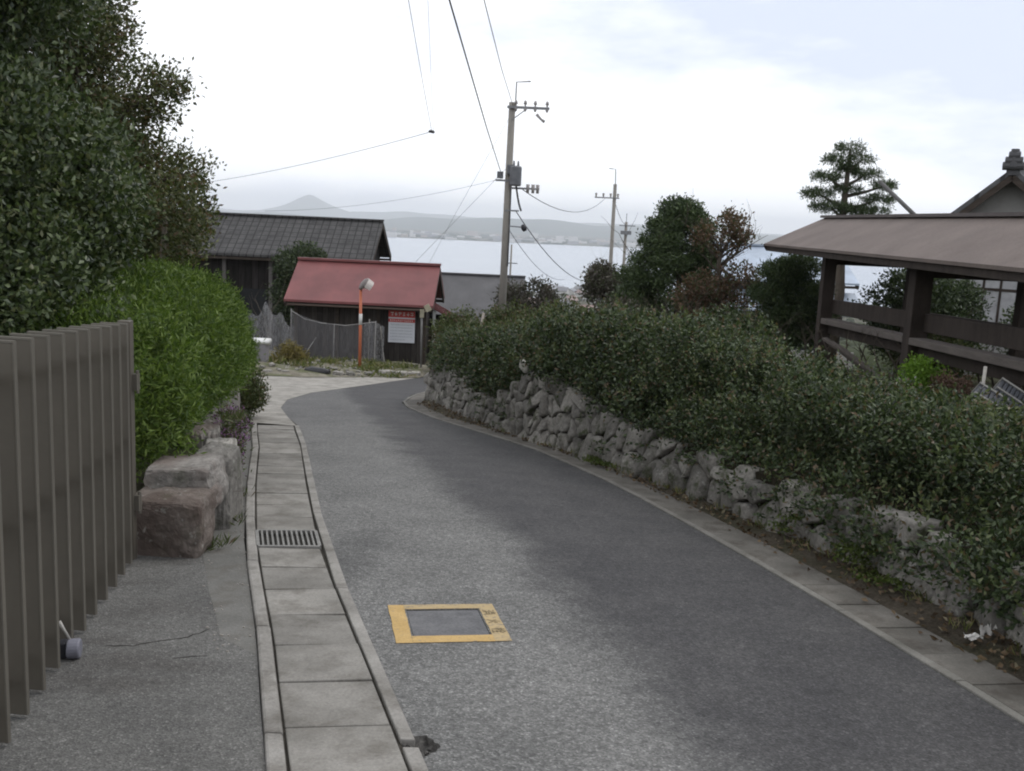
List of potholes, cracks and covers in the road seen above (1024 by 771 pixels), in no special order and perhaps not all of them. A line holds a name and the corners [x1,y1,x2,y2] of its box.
manhole cover [388,604,512,643]
crack [107,629,209,659]
drain grate [255,529,321,550]
pothole [402,735,441,757]
